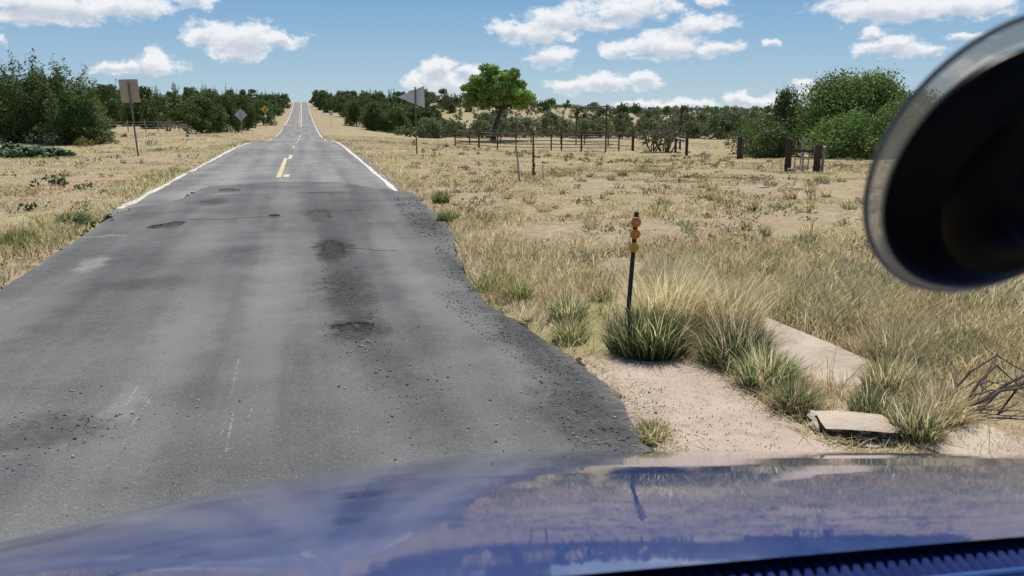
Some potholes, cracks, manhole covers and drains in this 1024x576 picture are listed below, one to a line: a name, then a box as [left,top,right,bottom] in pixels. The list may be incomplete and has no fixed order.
pothole [329,322,375,333]
pothole [309,211,332,220]
pothole [147,221,188,229]
pothole [321,240,346,259]
